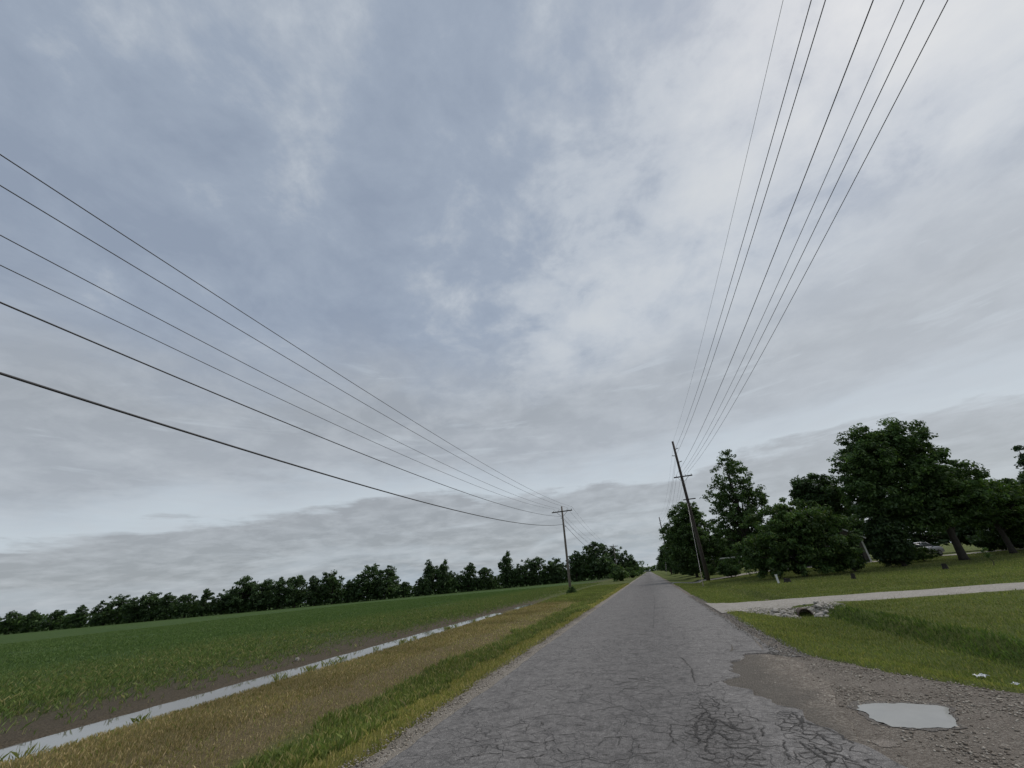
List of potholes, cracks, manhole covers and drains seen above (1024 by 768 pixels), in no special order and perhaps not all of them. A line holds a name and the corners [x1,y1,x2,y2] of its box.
pothole [847,701,968,731]
crack [448,656,882,768]
pothole [724,654,859,743]
